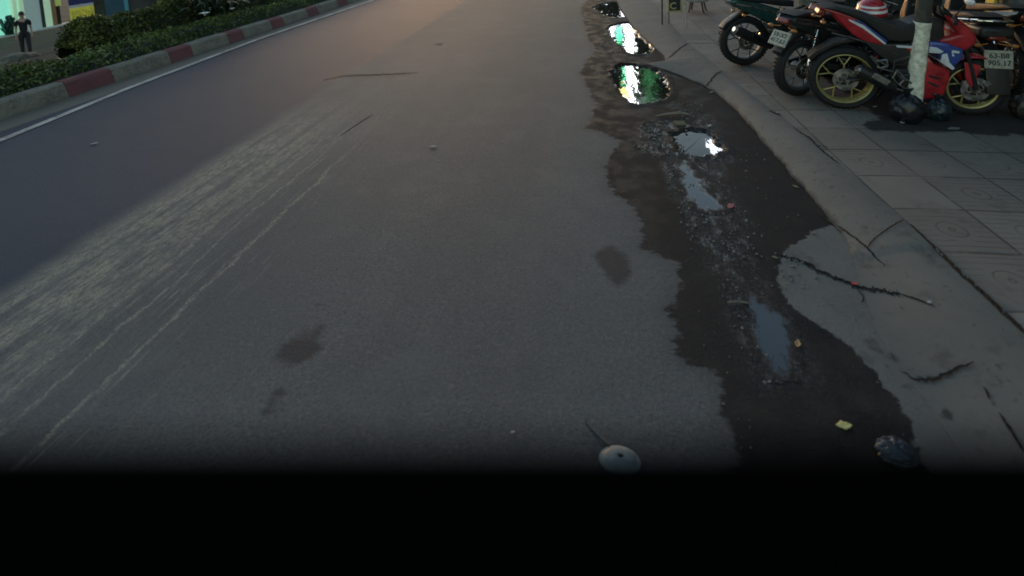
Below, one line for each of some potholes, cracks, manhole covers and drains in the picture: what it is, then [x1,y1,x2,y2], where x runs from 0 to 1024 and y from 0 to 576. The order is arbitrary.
pothole [603,61,679,108]
pothole [660,124,736,162]
pothole [601,21,658,56]
crack [901,361,1019,442]
pothole [589,1,626,19]
crack [779,215,934,306]
